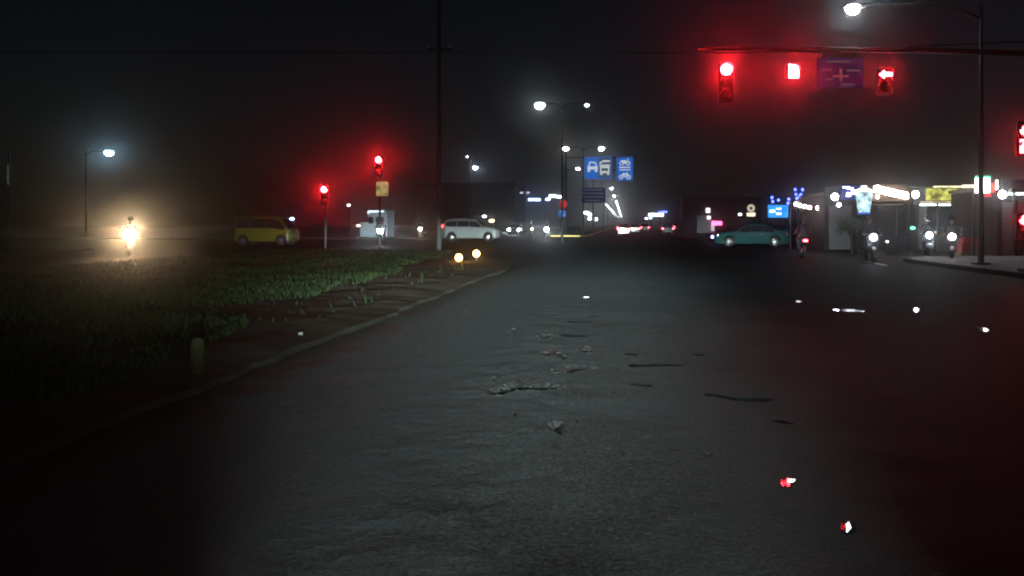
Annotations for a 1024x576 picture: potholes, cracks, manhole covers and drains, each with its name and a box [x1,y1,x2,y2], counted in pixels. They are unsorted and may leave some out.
pothole [548,364,601,373]
pothole [539,347,570,360]
pothole [542,421,568,435]
pothole [486,379,570,396]
crack [704,393,774,402]
crack [561,315,600,337]
crack [626,353,704,387]
